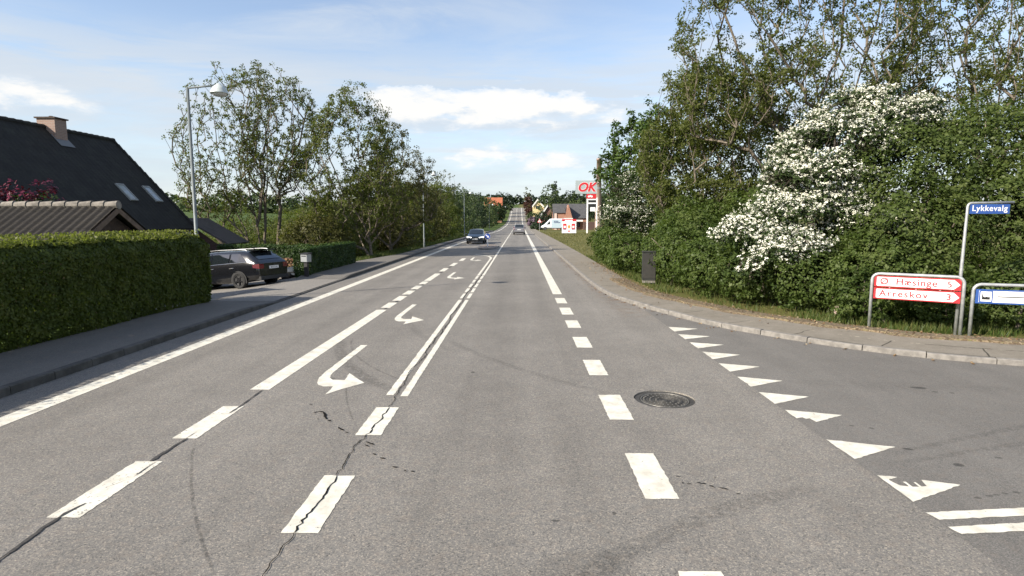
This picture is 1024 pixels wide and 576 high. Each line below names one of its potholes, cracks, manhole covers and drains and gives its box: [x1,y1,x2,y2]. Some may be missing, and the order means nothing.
manhole cover [635,392,695,408]
crack [262,259,493,576]
